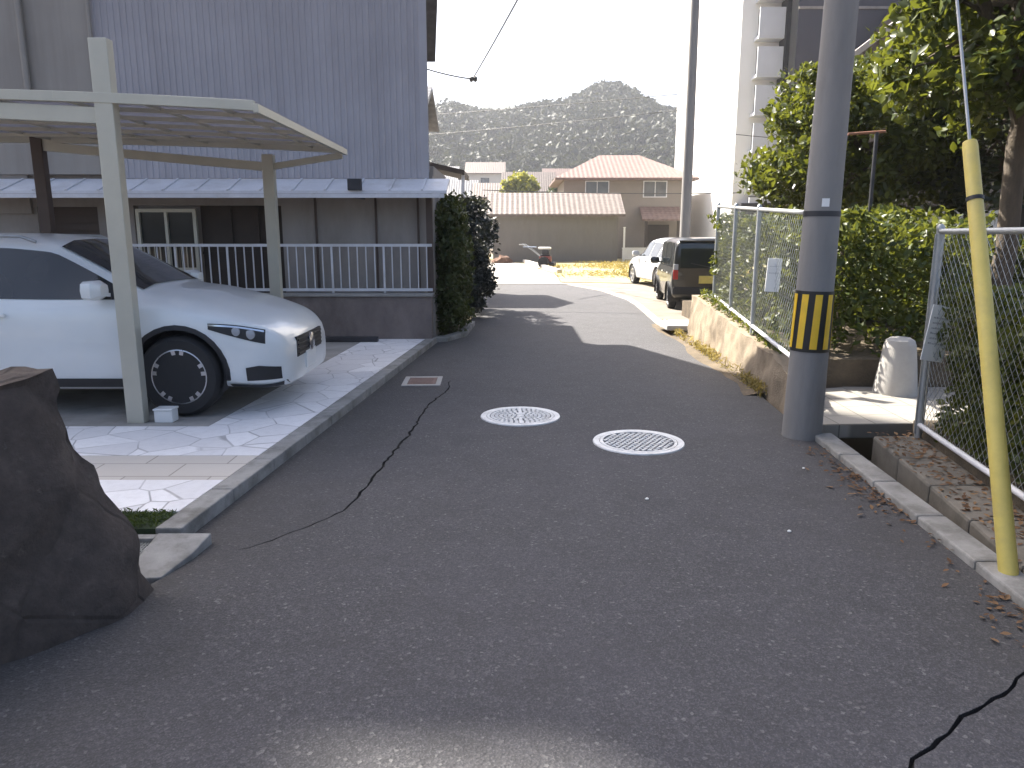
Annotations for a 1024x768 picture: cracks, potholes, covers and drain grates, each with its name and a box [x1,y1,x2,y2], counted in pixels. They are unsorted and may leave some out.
manhole cover [481,406,560,426]
crack [262,382,450,544]
utility cover [401,376,443,386]
crack [908,672,1024,768]
manhole cover [593,430,685,455]
